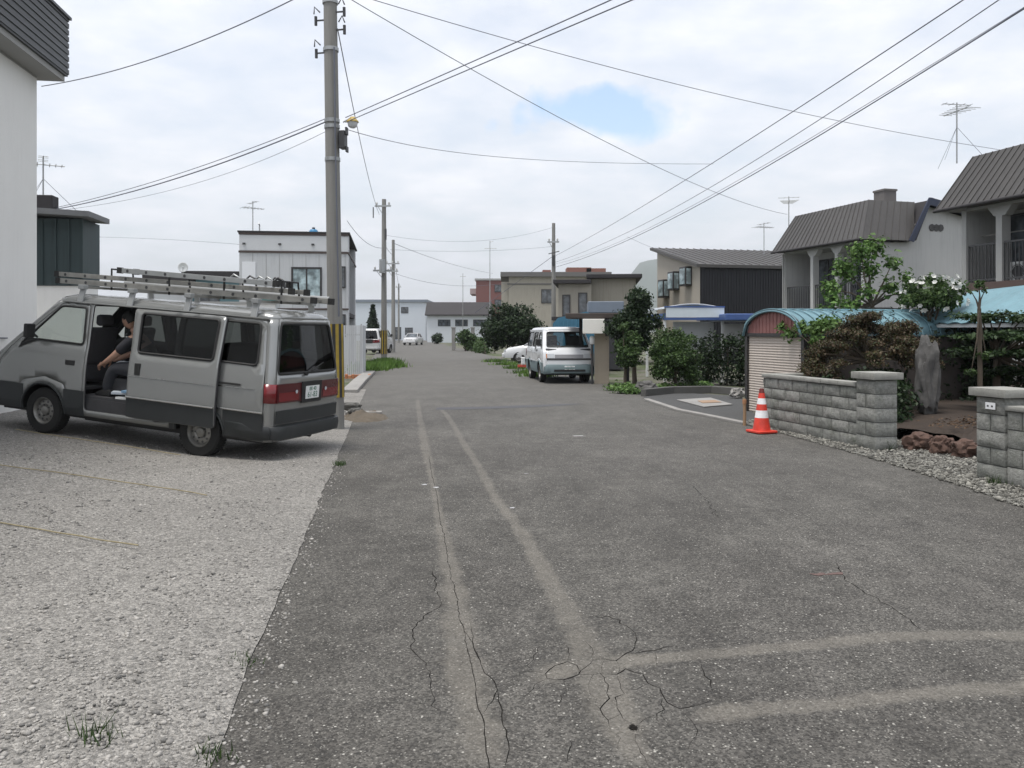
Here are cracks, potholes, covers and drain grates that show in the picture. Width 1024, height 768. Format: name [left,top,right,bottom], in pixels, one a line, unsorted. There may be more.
crack [410,571,447,713]
crack [837,565,930,634]
crack [518,616,711,767]
